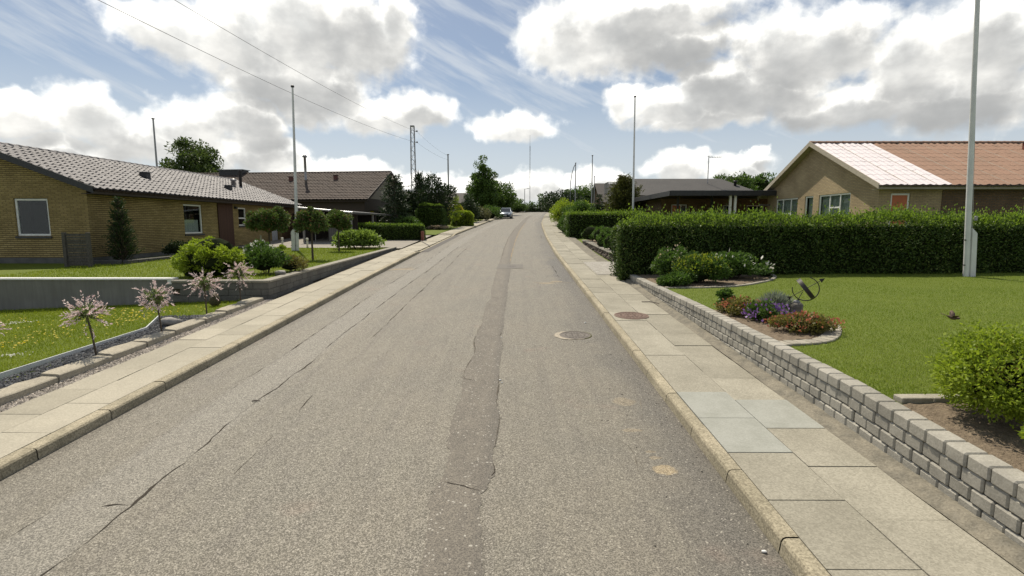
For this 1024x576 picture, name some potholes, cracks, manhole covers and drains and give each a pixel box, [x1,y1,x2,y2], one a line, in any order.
crack [40,247,466,576]
manhole cover [554,331,592,340]
